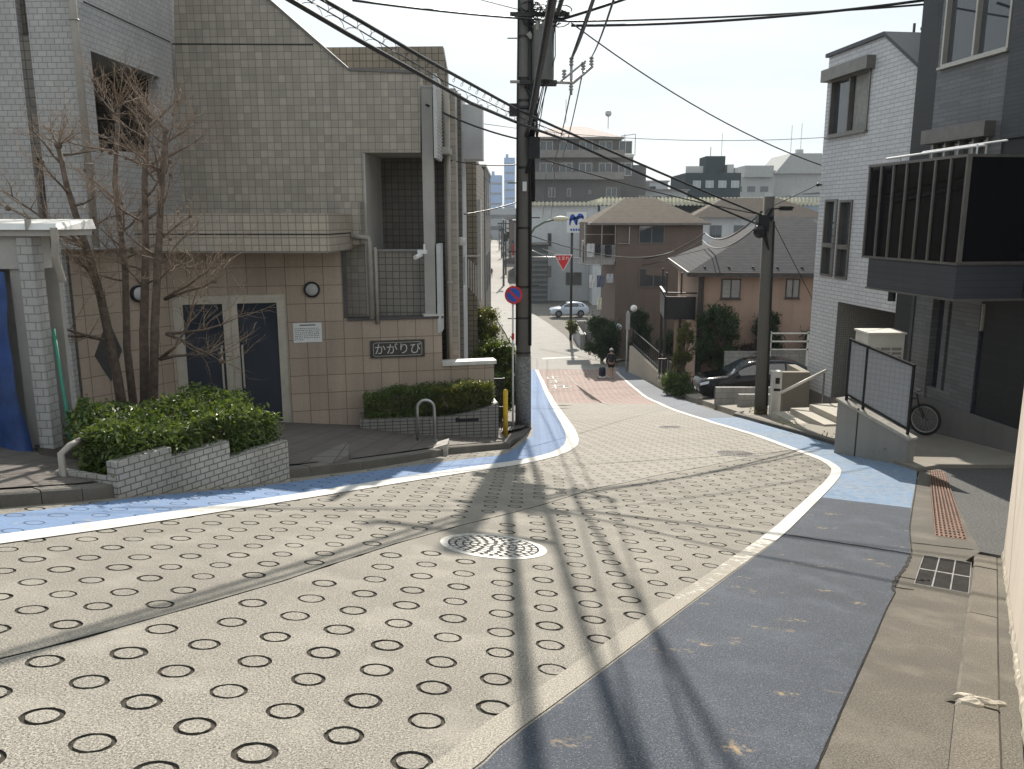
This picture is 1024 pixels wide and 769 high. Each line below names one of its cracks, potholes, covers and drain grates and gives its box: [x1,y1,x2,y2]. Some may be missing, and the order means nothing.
manhole cover [440,533,547,560]
drain grate [914,555,972,594]
